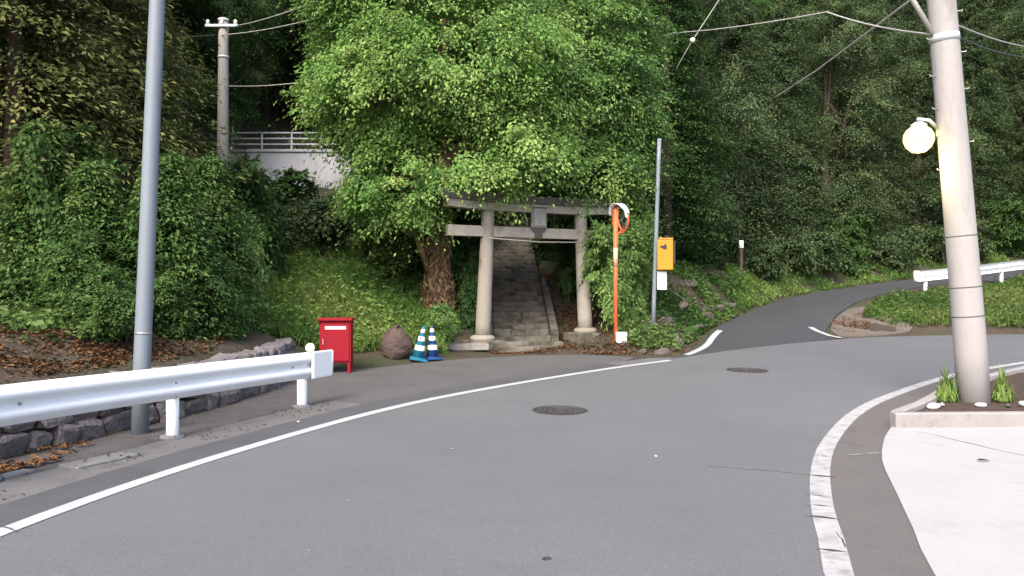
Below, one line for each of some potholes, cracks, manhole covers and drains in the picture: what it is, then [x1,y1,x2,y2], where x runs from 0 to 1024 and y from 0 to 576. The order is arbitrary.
crack [808,495,846,552]
crack [711,466,830,477]
manhole cover [532,405,588,415]
